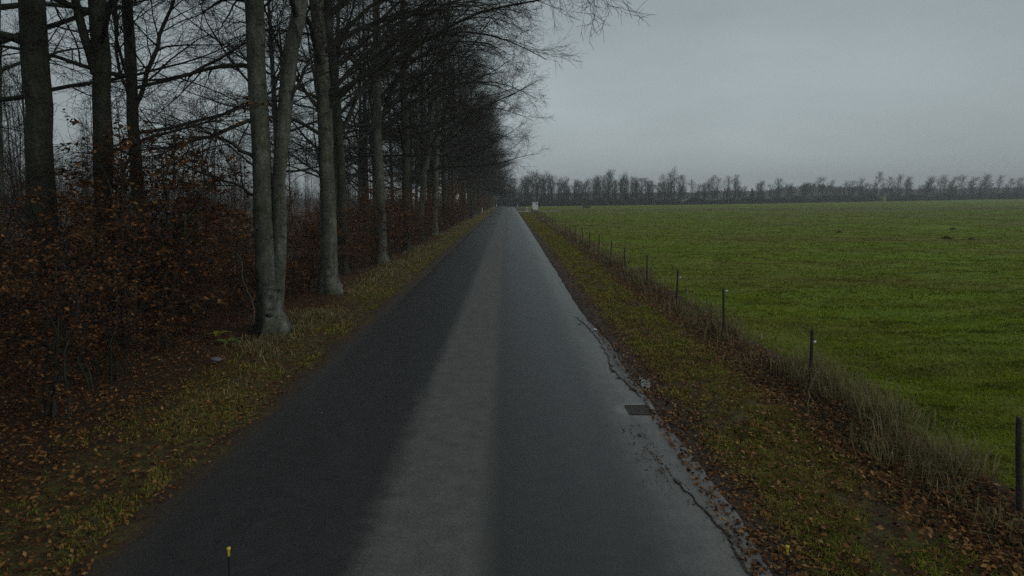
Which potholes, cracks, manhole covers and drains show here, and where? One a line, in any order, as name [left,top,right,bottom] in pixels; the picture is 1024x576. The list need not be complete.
crack [580,320,641,397]
